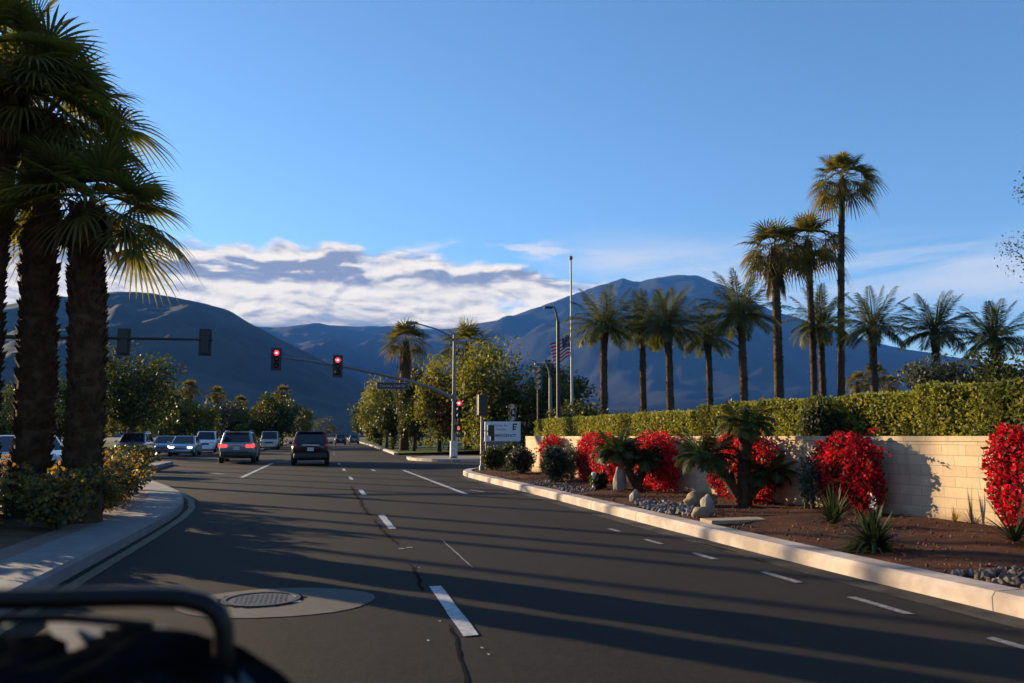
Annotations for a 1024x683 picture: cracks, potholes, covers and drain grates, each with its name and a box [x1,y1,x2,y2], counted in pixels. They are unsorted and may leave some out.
manhole cover [175,588,375,618]
crack [449,626,469,683]
crack [373,519,399,545]
crack [409,563,424,592]
